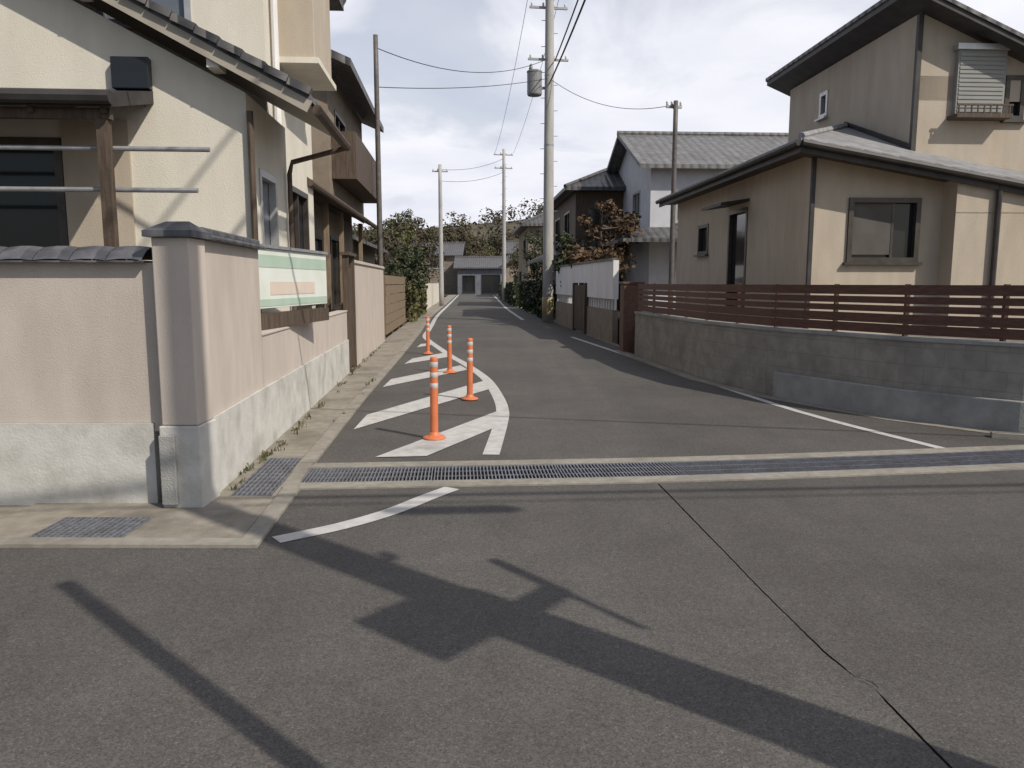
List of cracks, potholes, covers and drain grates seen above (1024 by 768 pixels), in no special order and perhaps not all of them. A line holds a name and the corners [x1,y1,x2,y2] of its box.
drain grate [673,458,810,475]
drain grate [786,455,925,471]
crack [659,485,952,768]
drain grate [995,449,1024,459]
drain grate [556,462,689,478]
drain grate [434,464,562,480]
drain grate [300,466,433,483]
drain grate [894,451,1024,467]
drain grate [230,458,302,496]
drain grate [29,517,153,538]
